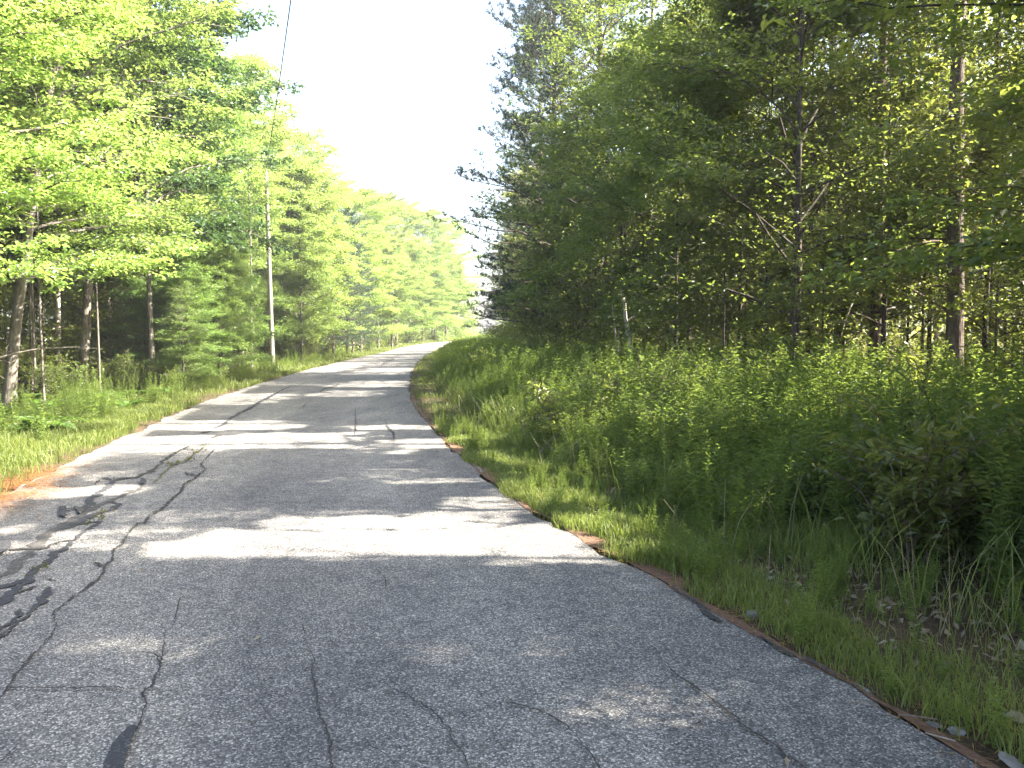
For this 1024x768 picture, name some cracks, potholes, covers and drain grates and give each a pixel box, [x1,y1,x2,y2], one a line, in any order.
crack [502,701,600,768]
crack [651,645,837,768]
crack [0,431,221,730]
crack [379,684,469,767]
crack [302,624,334,768]
